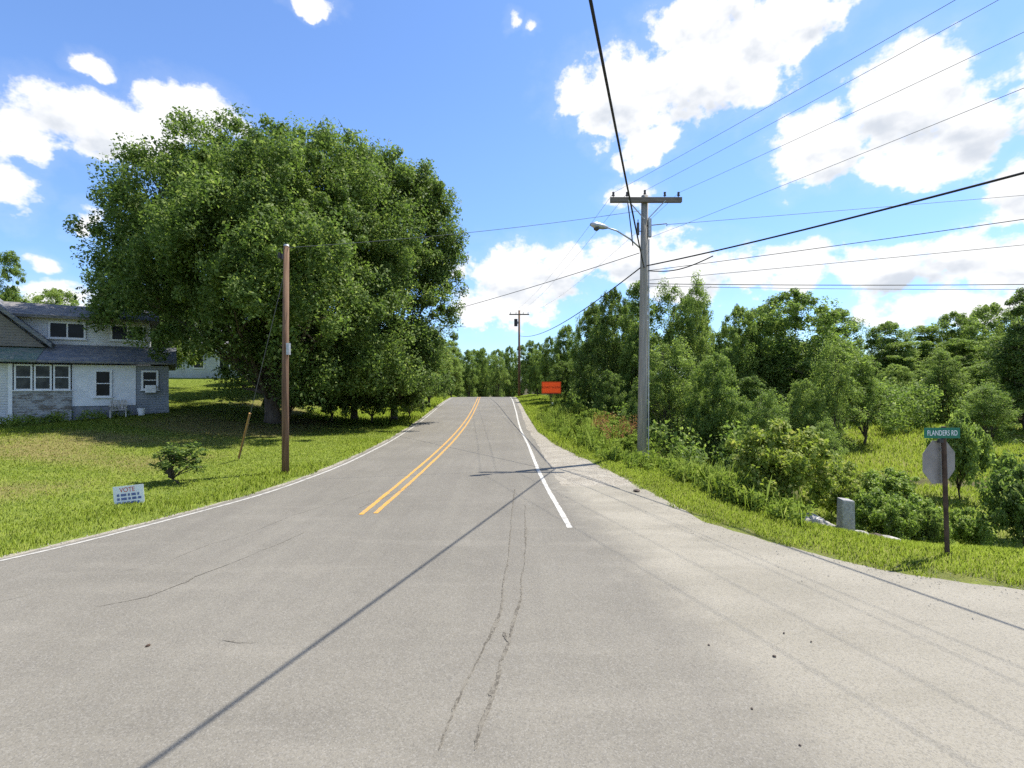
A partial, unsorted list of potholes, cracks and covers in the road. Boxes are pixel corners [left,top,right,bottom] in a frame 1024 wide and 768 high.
crack [439,489,528,750]
crack [1,488,405,606]
